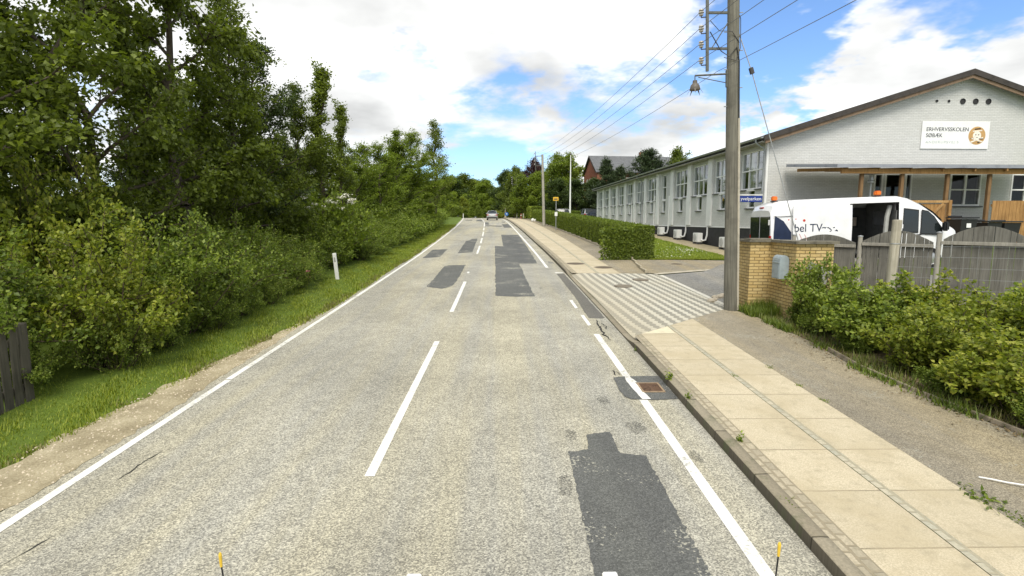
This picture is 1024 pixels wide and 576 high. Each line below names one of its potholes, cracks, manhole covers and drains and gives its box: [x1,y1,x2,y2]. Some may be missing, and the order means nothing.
drain grate [636,382,666,392]
